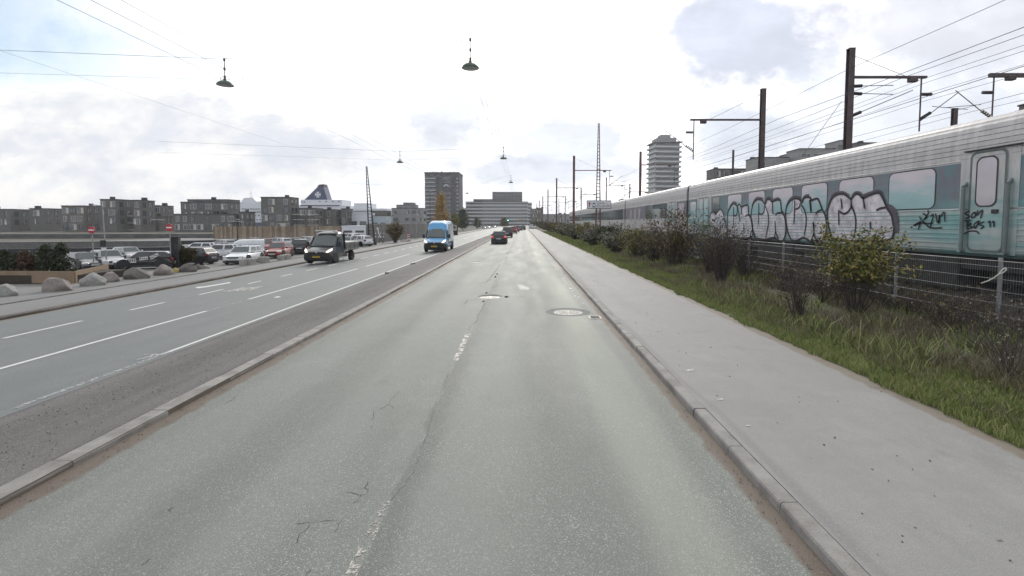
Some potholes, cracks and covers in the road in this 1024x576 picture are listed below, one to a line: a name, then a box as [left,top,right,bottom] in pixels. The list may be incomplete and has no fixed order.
manhole cover [544,308,594,317]
